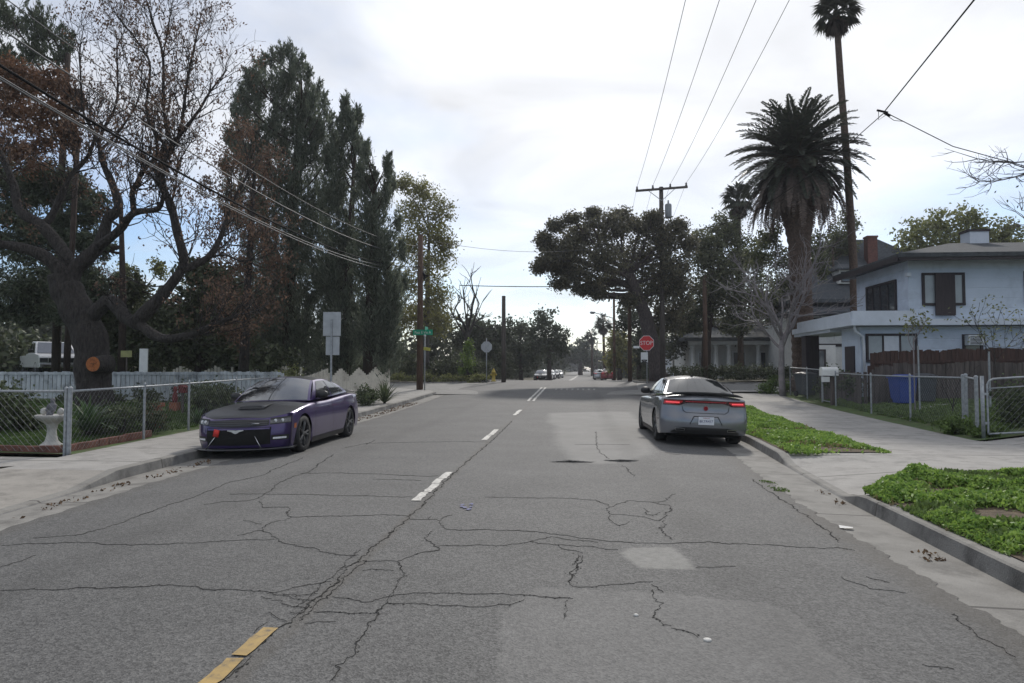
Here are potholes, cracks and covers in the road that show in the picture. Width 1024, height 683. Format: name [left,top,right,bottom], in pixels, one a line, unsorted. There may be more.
crack [952,614,1015,657]
crack [843,576,905,593]
crack [0,440,852,682]
